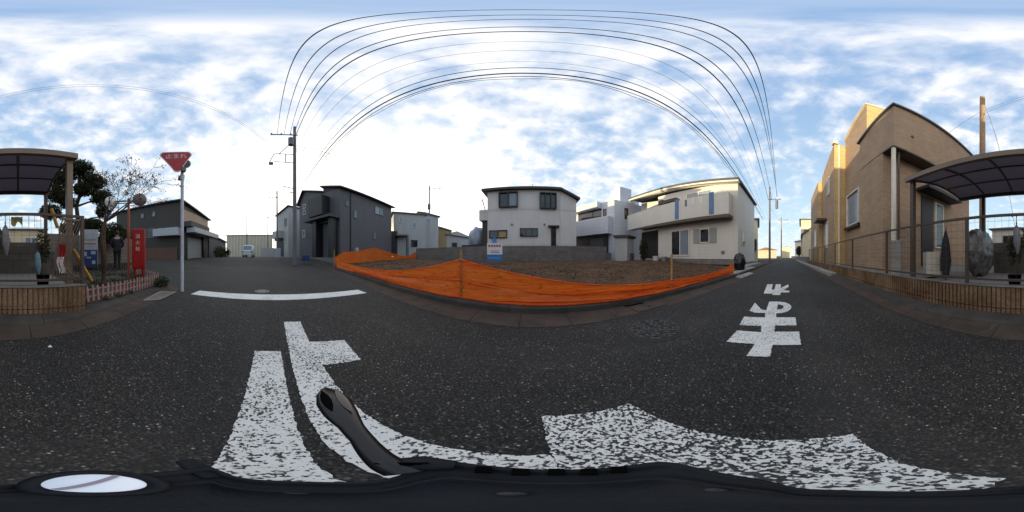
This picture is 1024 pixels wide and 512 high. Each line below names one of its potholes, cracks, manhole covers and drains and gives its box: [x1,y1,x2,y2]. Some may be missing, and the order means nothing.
manhole cover [625,318,685,342]
drain grate [143,291,176,301]
